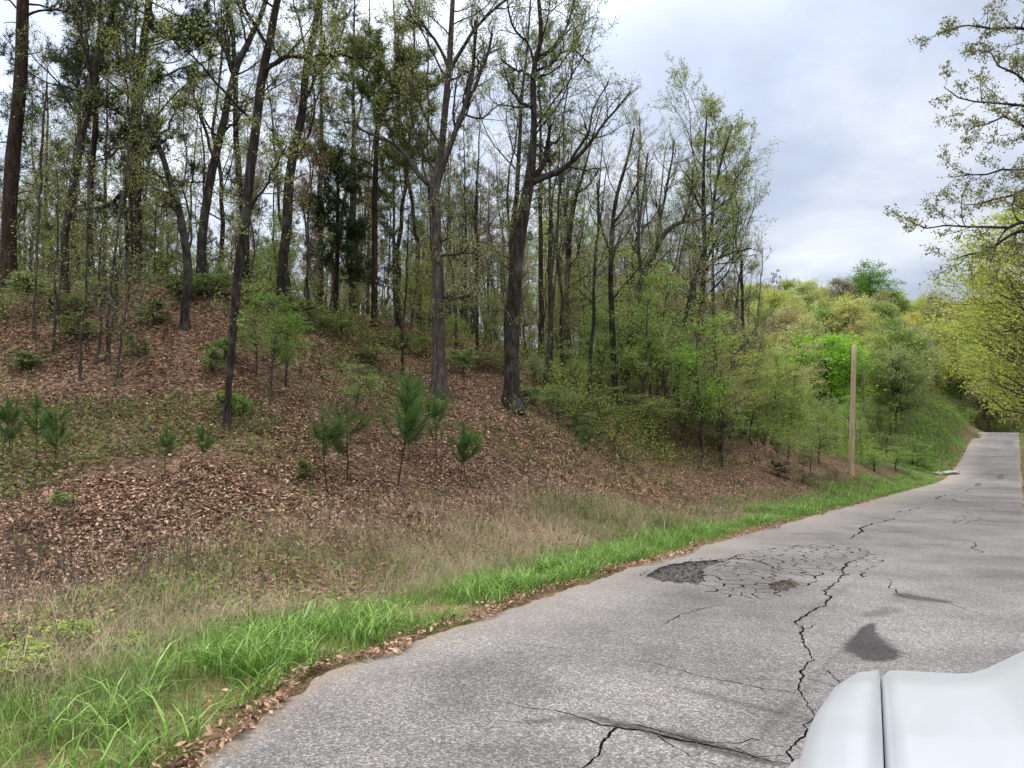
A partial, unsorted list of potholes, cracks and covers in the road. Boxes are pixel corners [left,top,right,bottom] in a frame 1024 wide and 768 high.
pothole [634,558,745,585]
pothole [768,580,799,591]
crack [462,488,994,768]
